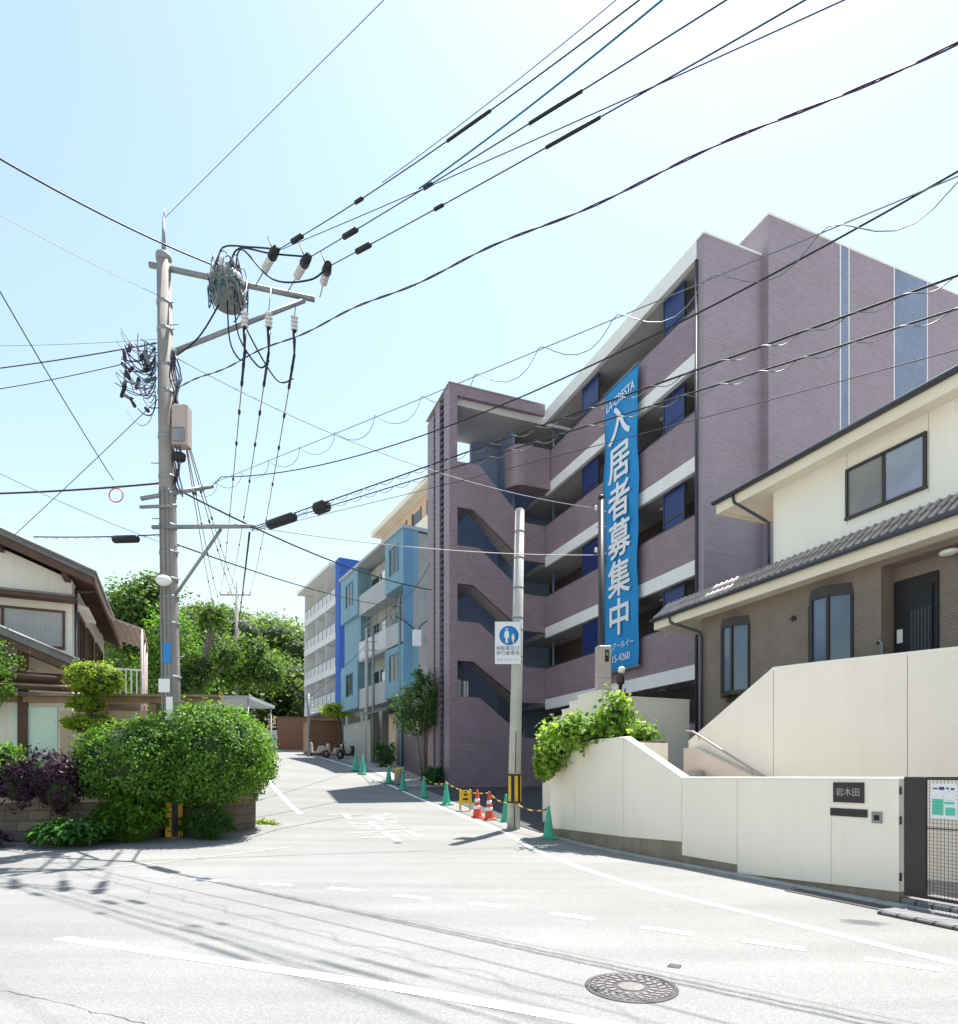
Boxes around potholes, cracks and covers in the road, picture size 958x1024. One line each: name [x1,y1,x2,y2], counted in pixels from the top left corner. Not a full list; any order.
manhole cover [585,973,679,1004]
crack [8,990,145,1024]
